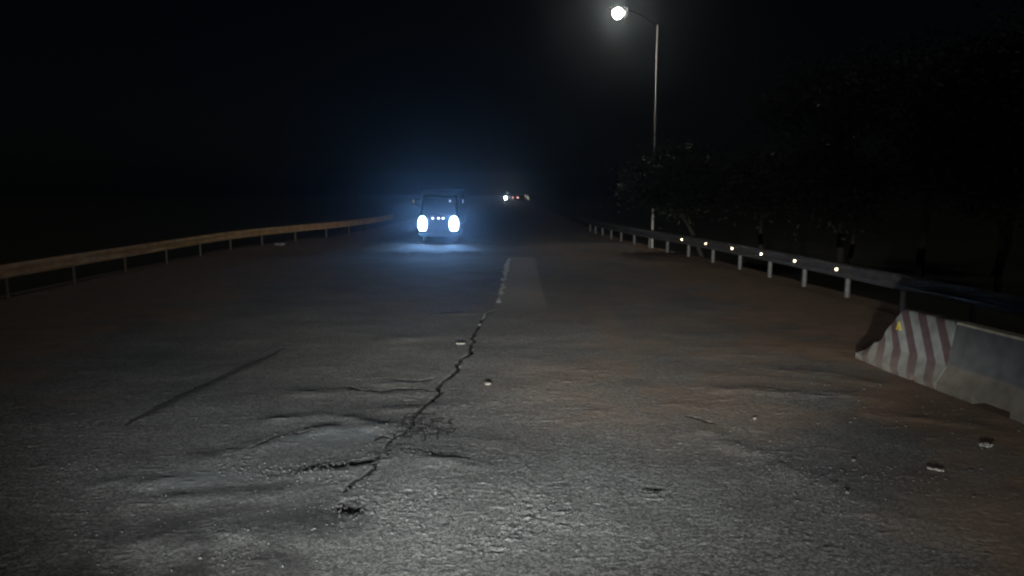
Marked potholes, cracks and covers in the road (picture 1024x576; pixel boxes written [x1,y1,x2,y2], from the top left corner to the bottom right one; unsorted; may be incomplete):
crack [252,424,318,447]
pothole [334,497,368,515]
crack [321,310,497,495]
